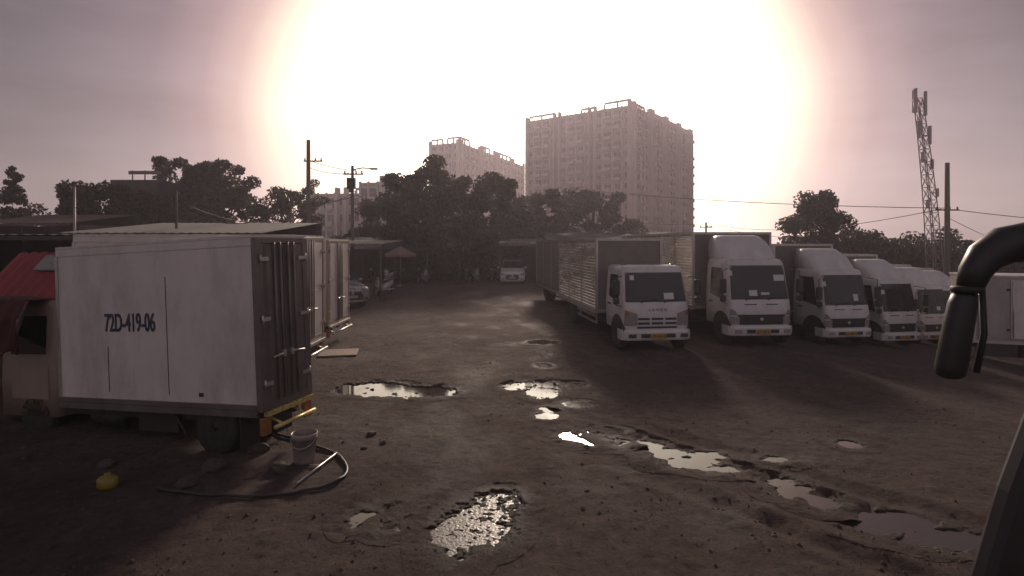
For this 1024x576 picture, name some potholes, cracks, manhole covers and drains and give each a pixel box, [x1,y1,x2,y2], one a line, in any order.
pothole [793,486,986,563]
pothole [315,377,473,402]
pothole [729,465,872,521]
pothole [539,425,648,454]
pothole [544,395,609,414]
pothole [516,338,570,346]
pothole [400,477,547,576]
pothole [489,376,599,405]
pothole [520,403,573,422]
pothole [348,508,431,546]
pothole [570,421,770,482]
